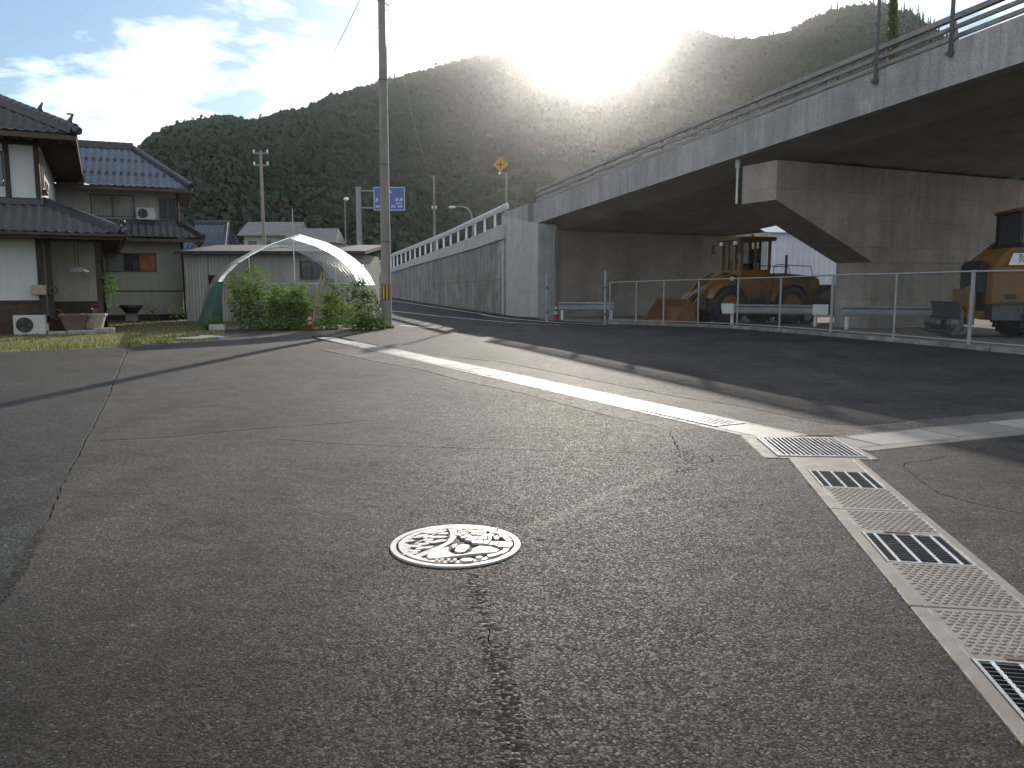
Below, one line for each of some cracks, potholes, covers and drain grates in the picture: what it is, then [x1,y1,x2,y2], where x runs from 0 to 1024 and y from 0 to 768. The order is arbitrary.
crack [467,577,533,766]
manhole cover [390,524,520,568]
drain grate [971,656,1024,721]
drain grate [756,437,868,458]
drain grate [808,470,886,489]
crack [669,433,713,472]
drain grate [862,531,977,566]
drain grate [645,408,744,427]
crack [898,456,1024,514]
